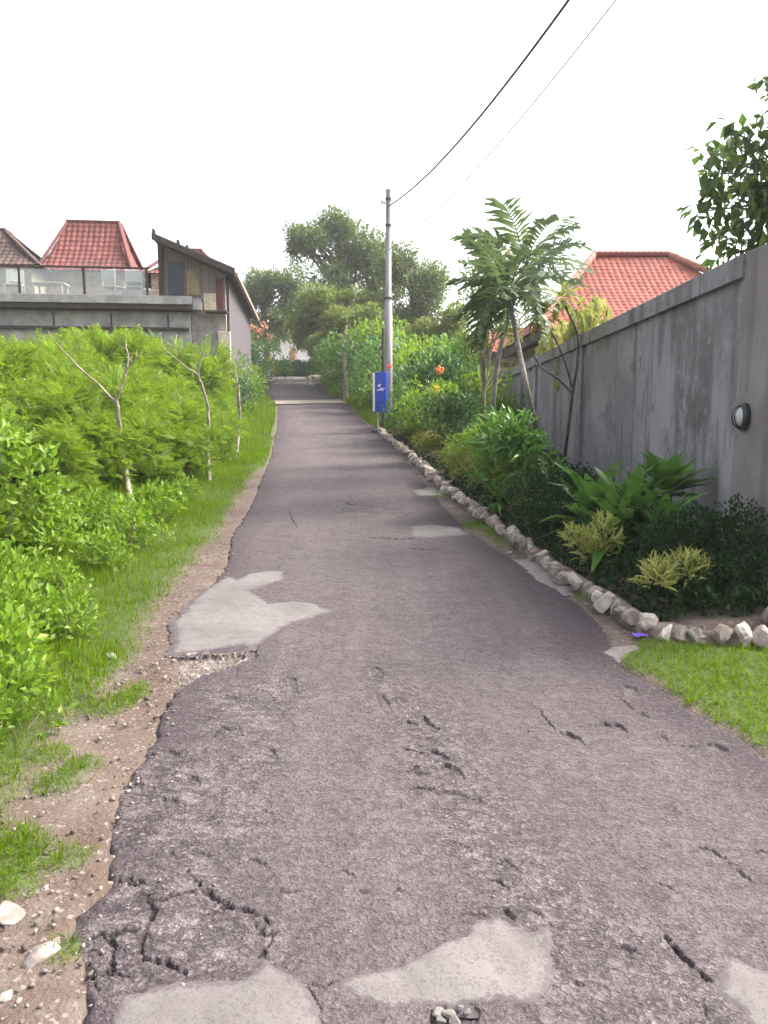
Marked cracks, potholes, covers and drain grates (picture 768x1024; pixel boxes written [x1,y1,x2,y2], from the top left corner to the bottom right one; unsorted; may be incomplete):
pothole [171,651,248,696]
crack [536,708,559,731]
crack [655,729,706,750]
crack [287,509,298,528]
crack [82,856,369,1024]
crack [612,694,637,710]
crack [694,845,768,889]
crack [608,930,720,1024]
crack [400,747,445,793]
crack [367,536,442,550]
